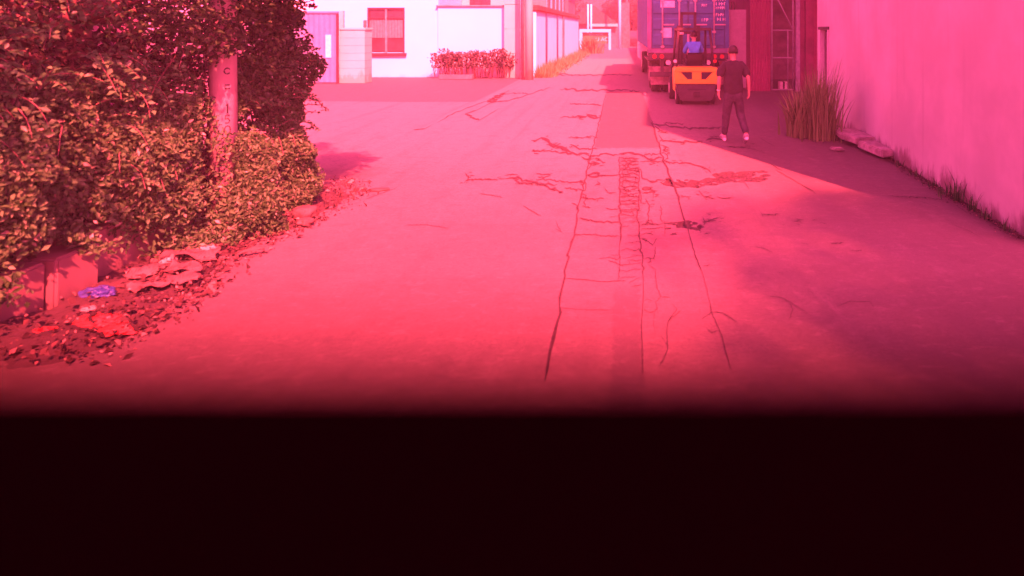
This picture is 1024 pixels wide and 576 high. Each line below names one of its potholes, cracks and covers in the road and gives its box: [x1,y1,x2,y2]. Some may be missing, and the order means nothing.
crack [460,94,815,338]
crack [414,87,550,130]
